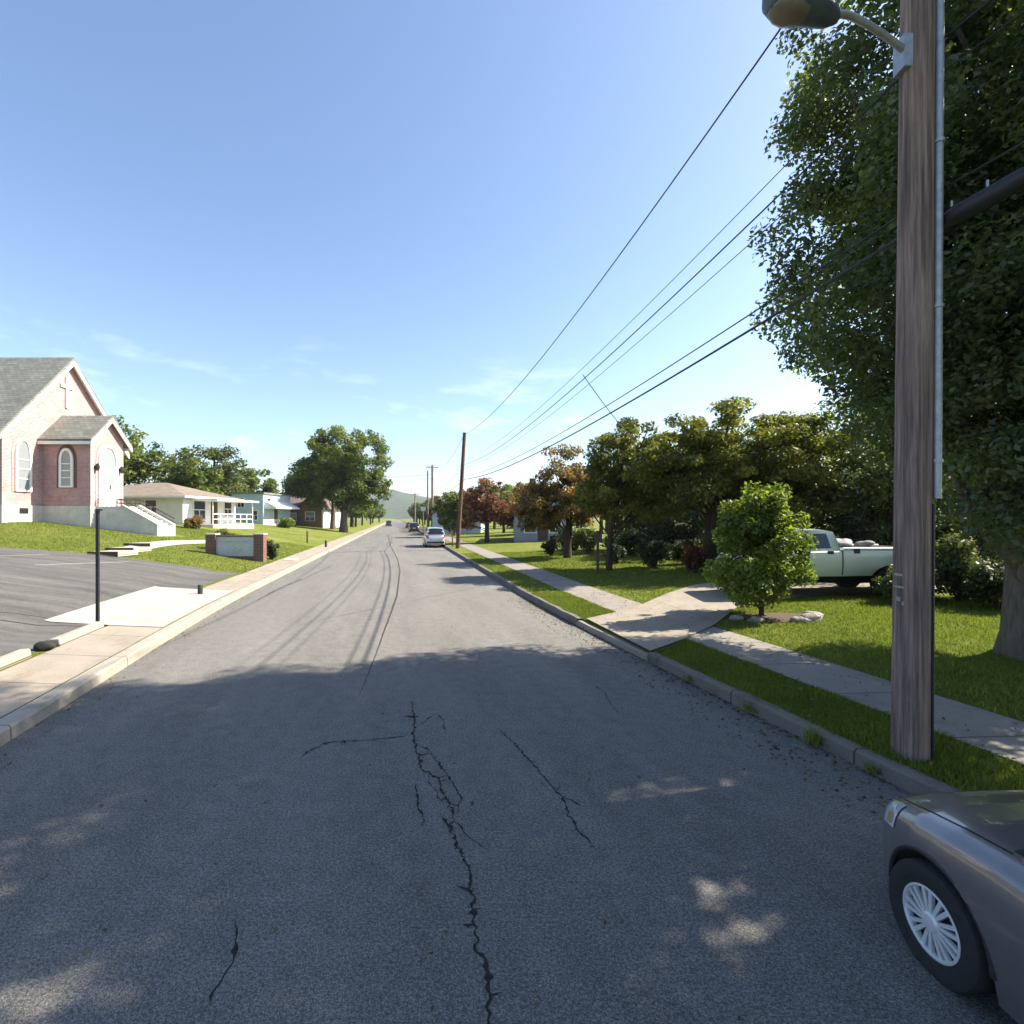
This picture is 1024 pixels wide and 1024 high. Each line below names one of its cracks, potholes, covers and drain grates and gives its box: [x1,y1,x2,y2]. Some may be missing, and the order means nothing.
crack [501,730,593,847]
crack [205,919,238,1008]
crack [302,700,501,1024]
